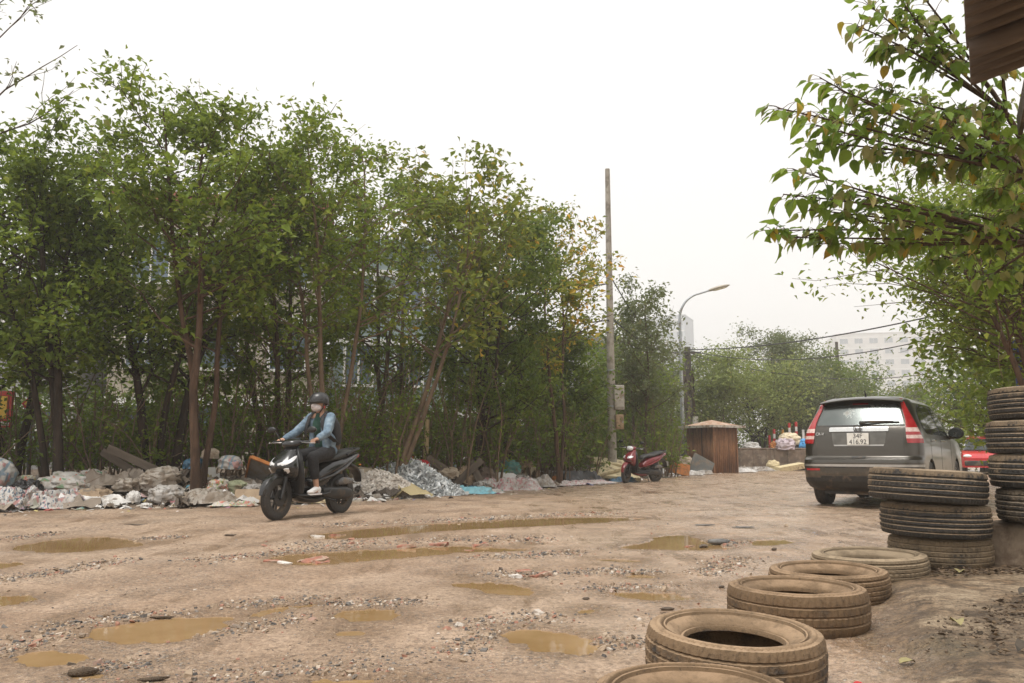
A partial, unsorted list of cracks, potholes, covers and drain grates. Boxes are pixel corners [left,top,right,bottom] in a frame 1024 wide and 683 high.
pothole [307,517,648,539]
pothole [0,594,40,606]
pothole [12,536,145,553]
pothole [447,580,537,596]
pothole [264,545,531,565]
pothole [79,614,239,645]
pothole [6,647,92,667]
pothole [498,627,603,656]
pothole [607,590,697,601]
pothole [331,607,405,622]
pothole [618,535,735,551]
